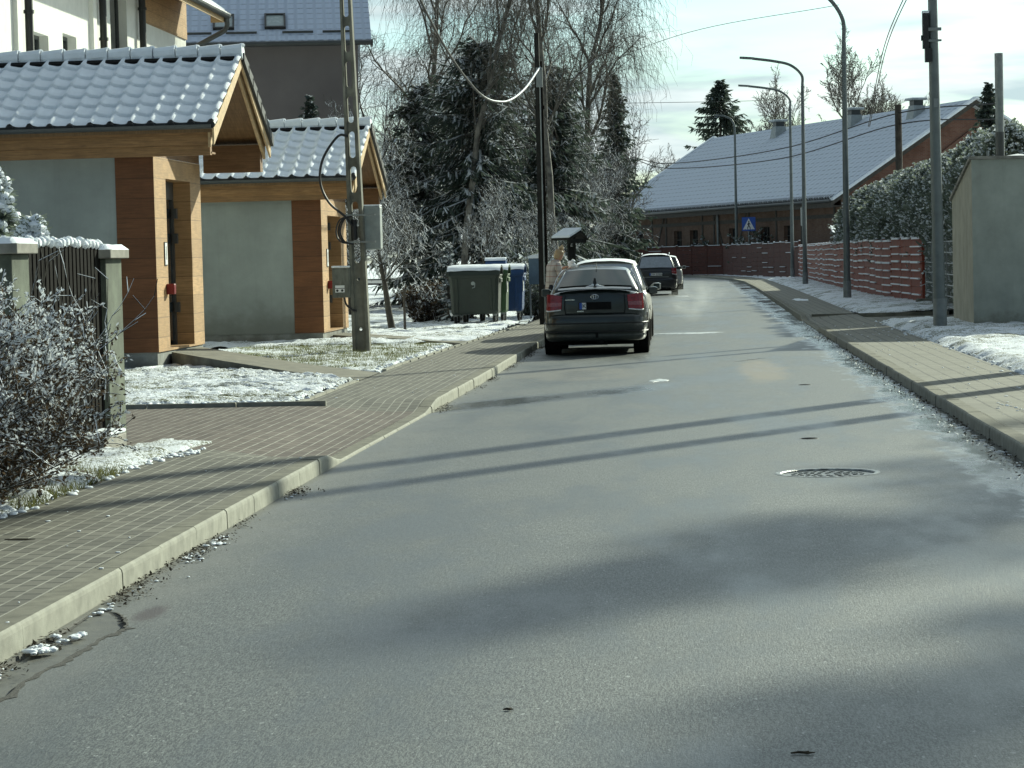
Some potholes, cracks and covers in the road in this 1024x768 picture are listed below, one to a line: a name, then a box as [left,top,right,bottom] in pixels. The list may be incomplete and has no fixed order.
manhole cover [775,468,880,477]
pothole [0,610,133,702]
